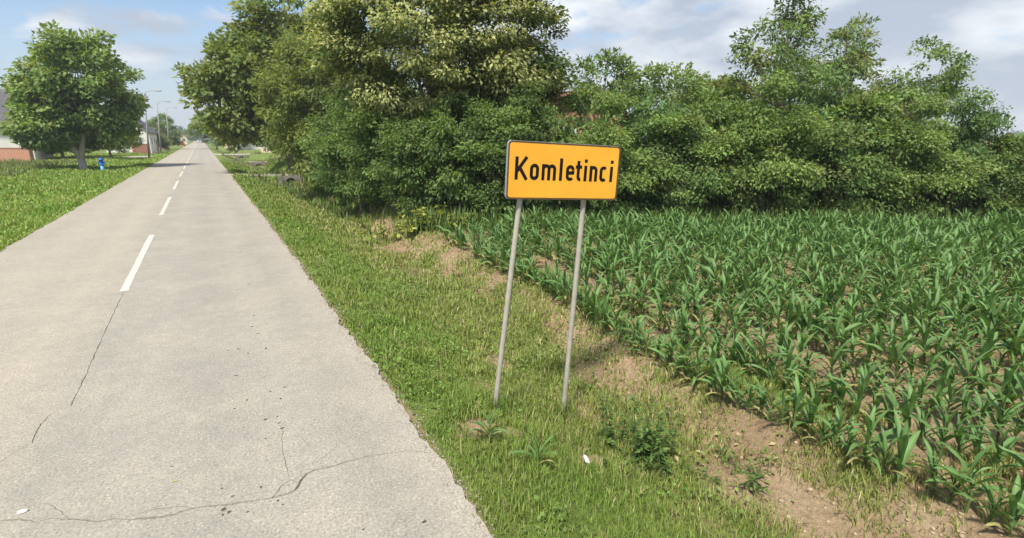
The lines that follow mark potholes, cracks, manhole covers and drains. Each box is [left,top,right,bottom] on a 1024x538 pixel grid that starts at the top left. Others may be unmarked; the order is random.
crack [0,429,428,523]
crack [2,293,124,461]
